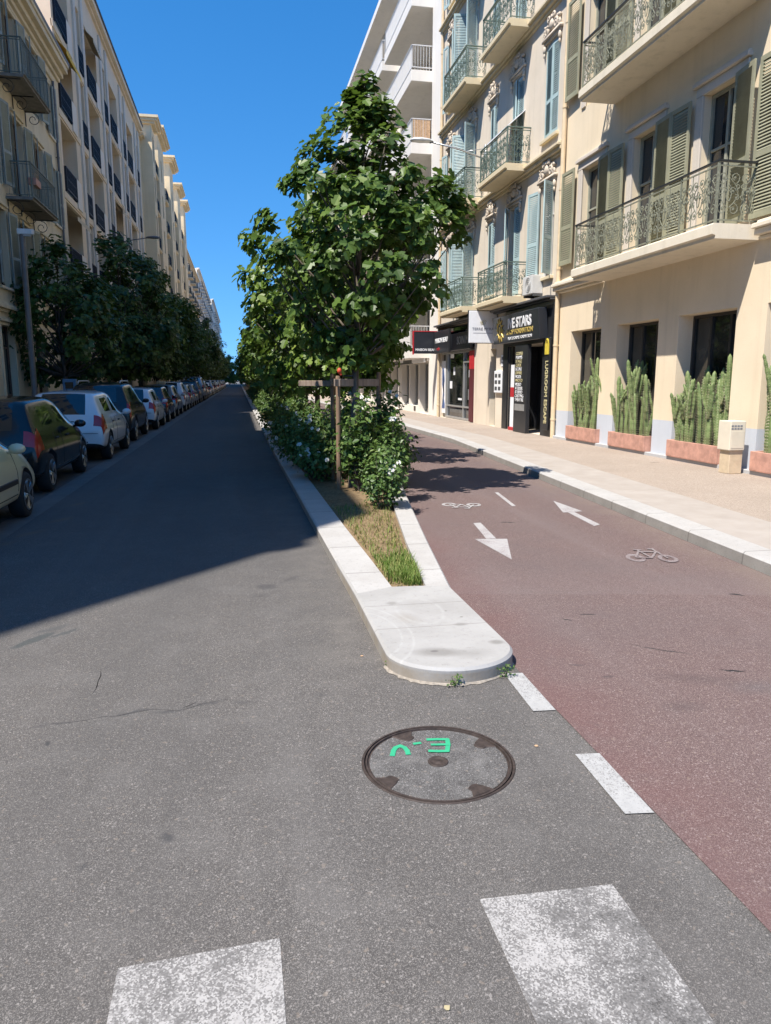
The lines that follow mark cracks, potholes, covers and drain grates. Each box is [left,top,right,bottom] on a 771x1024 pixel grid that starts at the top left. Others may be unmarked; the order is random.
manhole cover [362,726,516,805]
crack [51,699,238,724]
